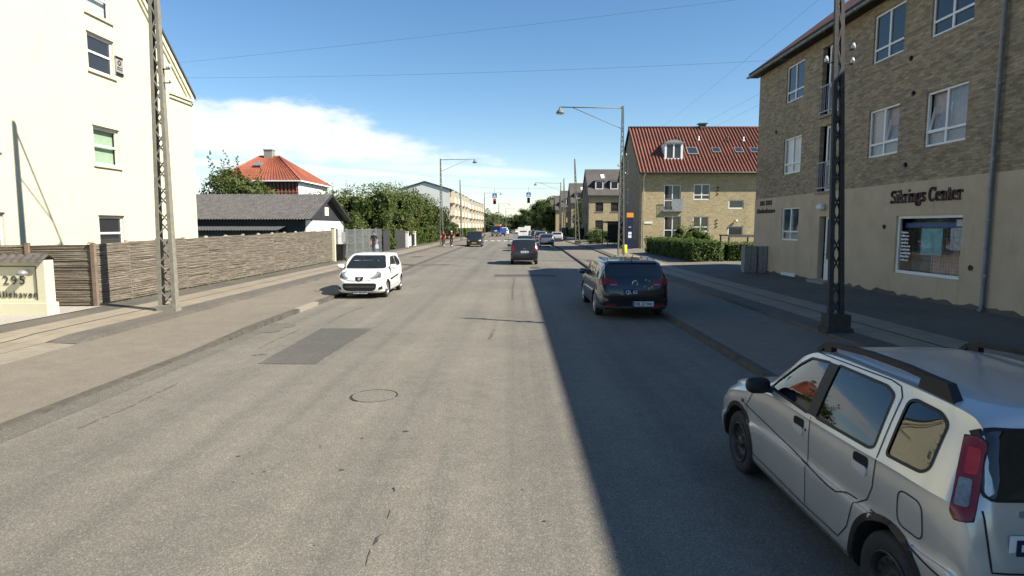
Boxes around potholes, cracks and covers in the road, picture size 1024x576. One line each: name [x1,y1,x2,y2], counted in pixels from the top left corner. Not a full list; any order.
manhole cover [350,389,398,402]
crack [79,383,177,428]
